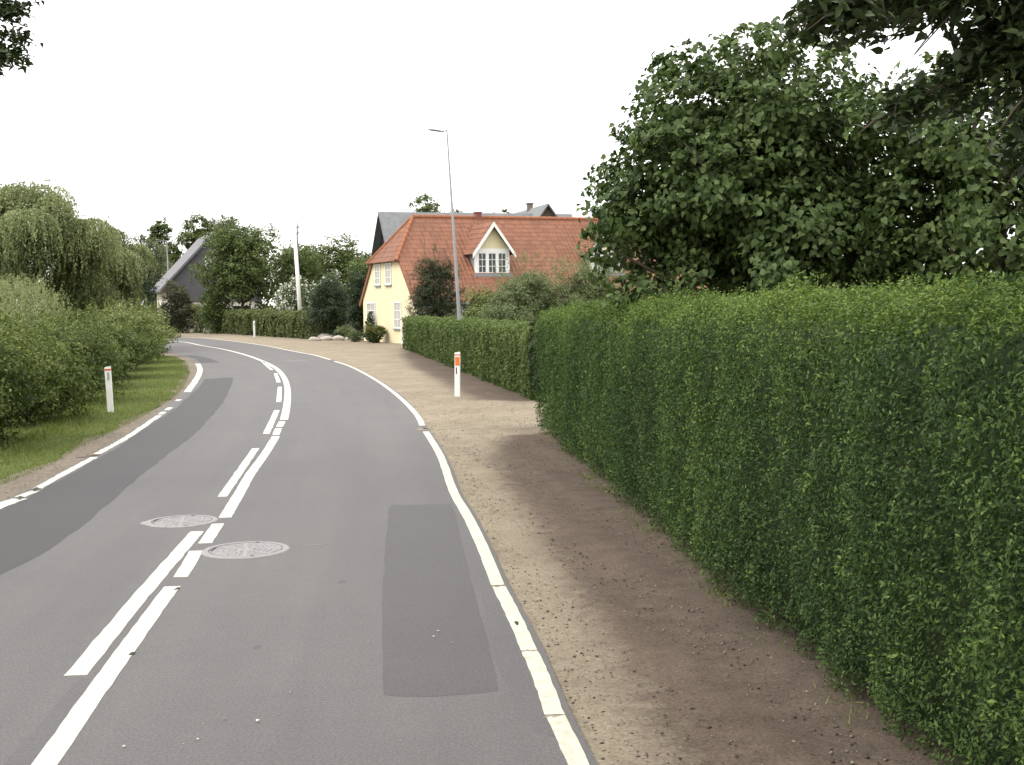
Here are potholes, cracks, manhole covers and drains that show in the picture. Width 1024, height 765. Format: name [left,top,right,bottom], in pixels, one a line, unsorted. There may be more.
manhole cover [140,515,219,528]
manhole cover [201,541,290,559]
